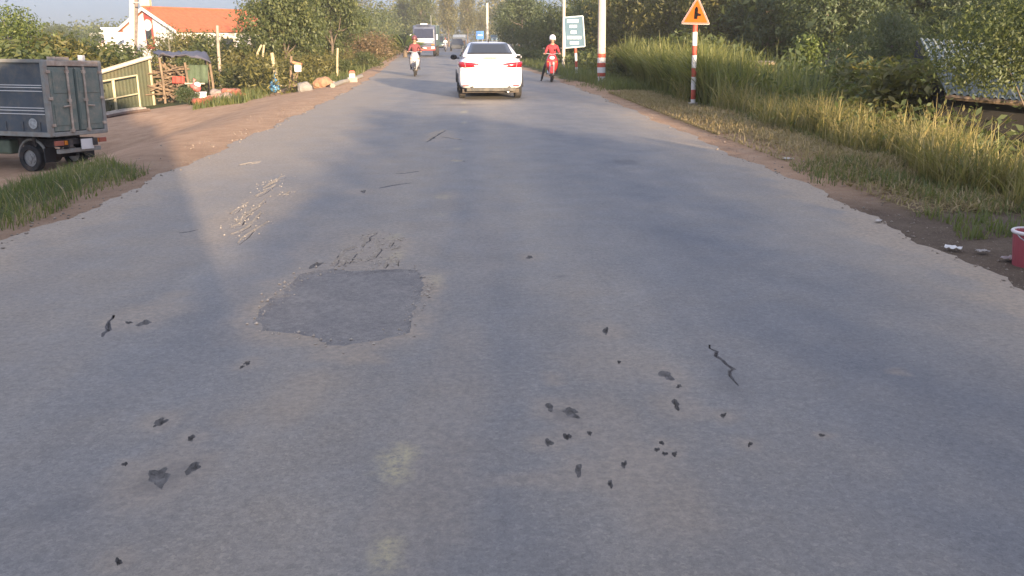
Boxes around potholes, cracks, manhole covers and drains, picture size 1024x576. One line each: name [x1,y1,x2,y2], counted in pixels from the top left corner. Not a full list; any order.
pothole [185,462,201,475]
pothole [148,467,171,489]
pothole [561,407,580,419]
crack [426,129,460,142]
crack [708,345,739,386]
